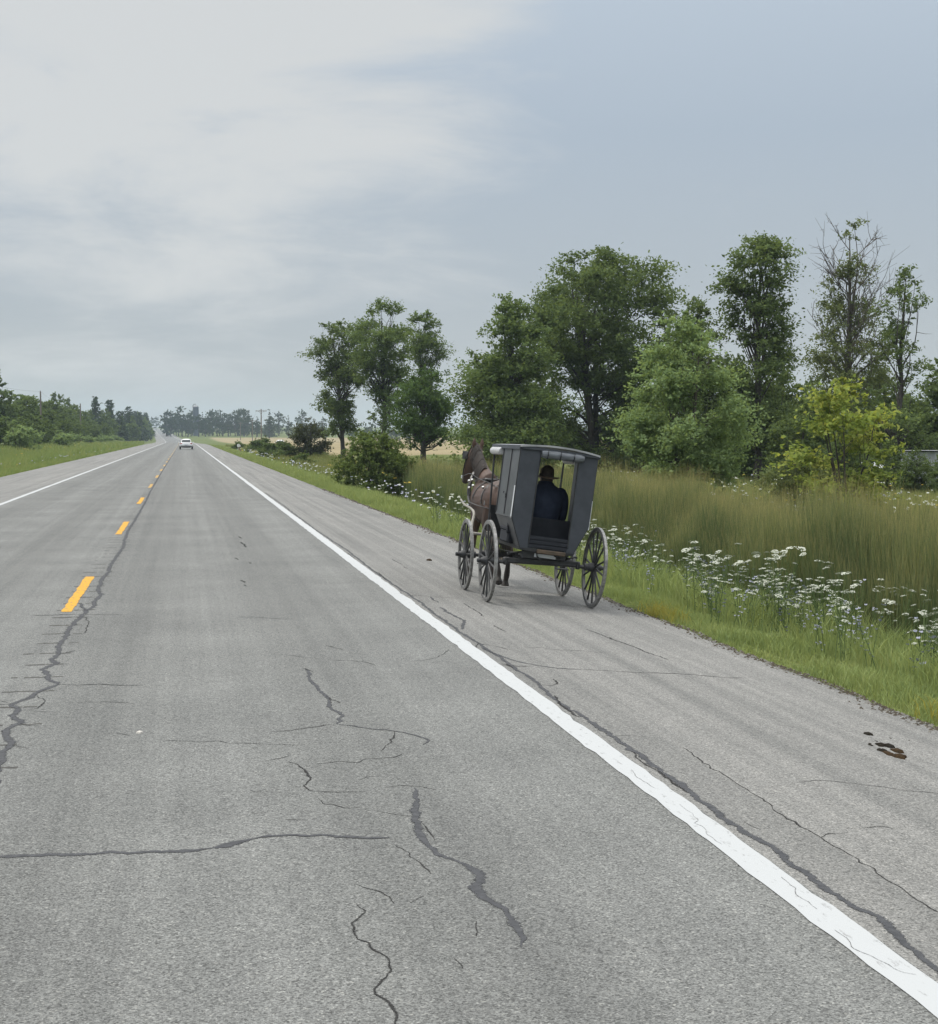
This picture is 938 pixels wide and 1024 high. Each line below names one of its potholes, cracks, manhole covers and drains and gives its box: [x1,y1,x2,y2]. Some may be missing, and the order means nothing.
crack [161,646,430,808]
crack [627,735,938,912]
crack [351,884,424,1024]
